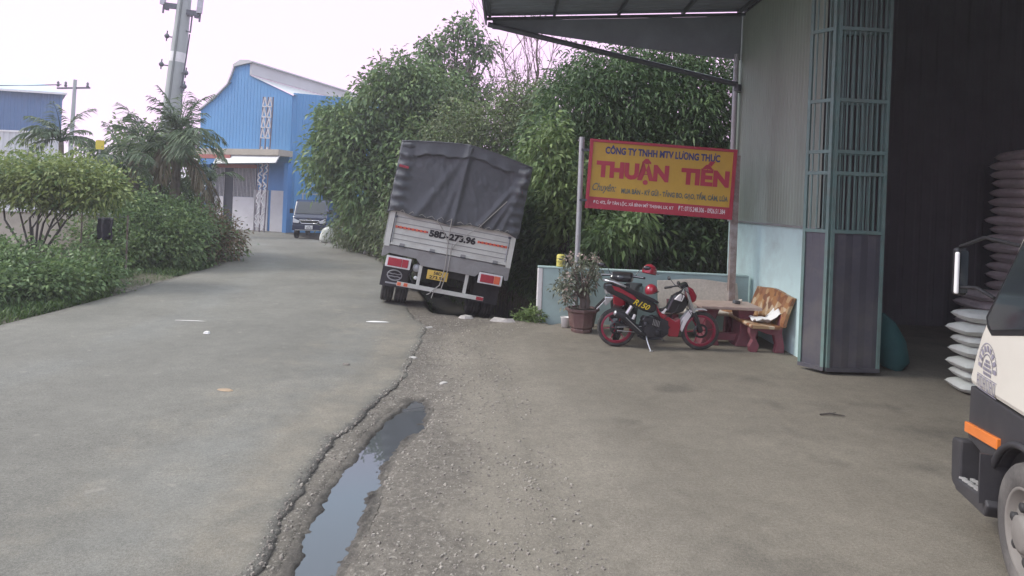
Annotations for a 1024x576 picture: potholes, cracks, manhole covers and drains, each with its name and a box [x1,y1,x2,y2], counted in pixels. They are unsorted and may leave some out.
pothole [276,398,434,576]
